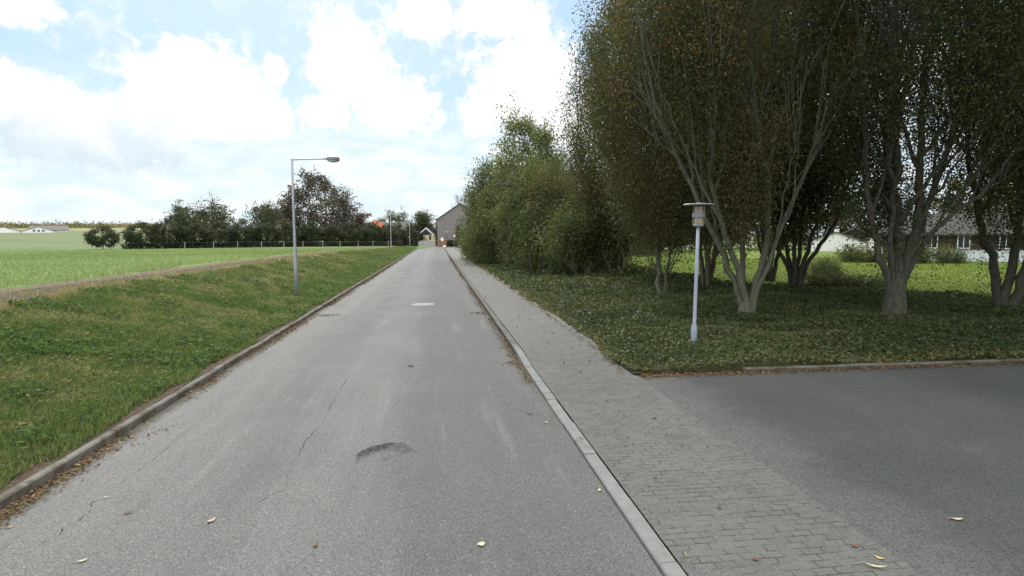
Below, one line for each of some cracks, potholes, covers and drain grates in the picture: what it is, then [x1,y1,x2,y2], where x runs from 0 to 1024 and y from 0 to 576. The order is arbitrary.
crack [258,379,347,503]
pothole [353,442,421,478]
crack [40,448,167,545]
